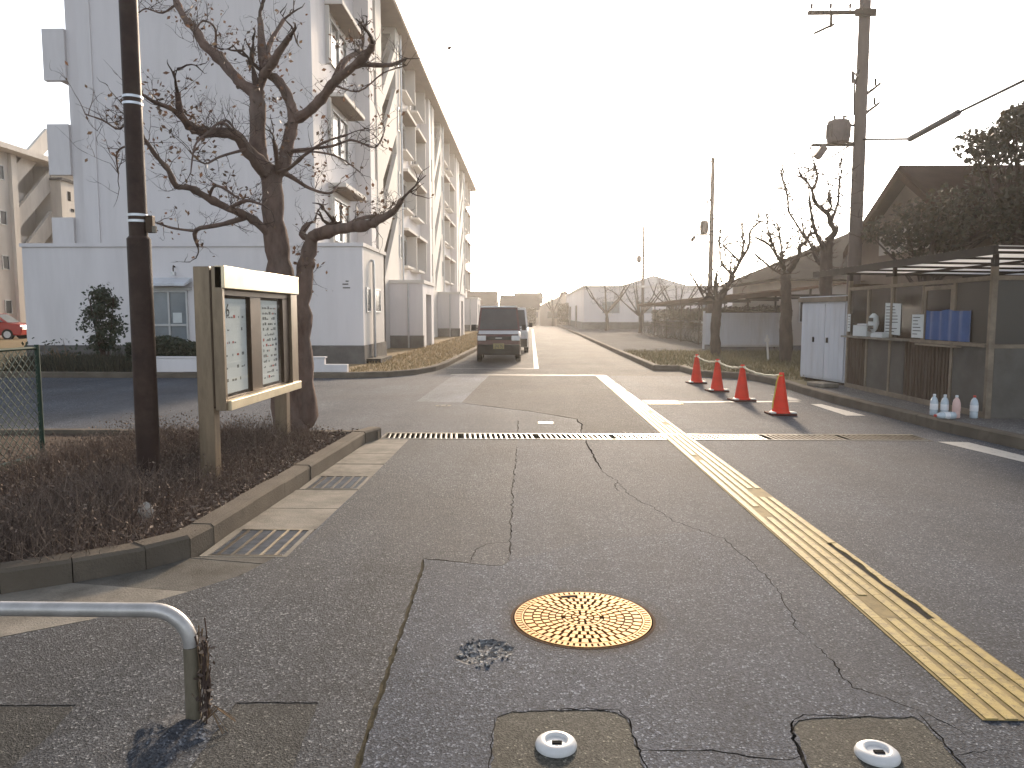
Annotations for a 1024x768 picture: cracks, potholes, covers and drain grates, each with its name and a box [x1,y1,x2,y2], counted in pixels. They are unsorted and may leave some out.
pothole [453,638,514,667]
drain grate [299,476,372,490]
crack [466,403,1017,768]
manhole cover [510,591,656,650]
drain grate [199,528,314,558]
